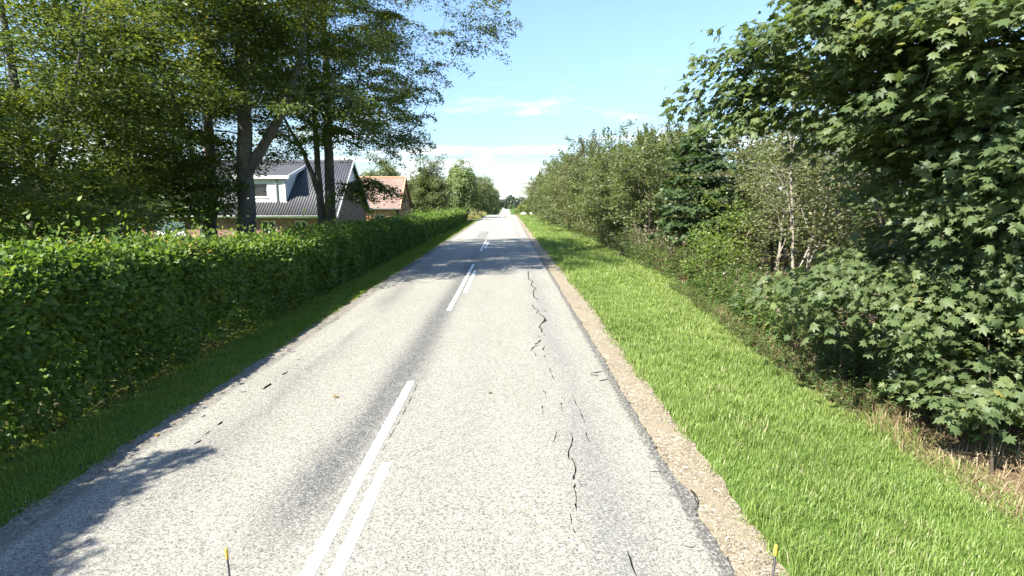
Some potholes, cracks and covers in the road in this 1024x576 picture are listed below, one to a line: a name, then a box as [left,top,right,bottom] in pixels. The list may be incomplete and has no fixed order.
crack [527,267,637,576]
